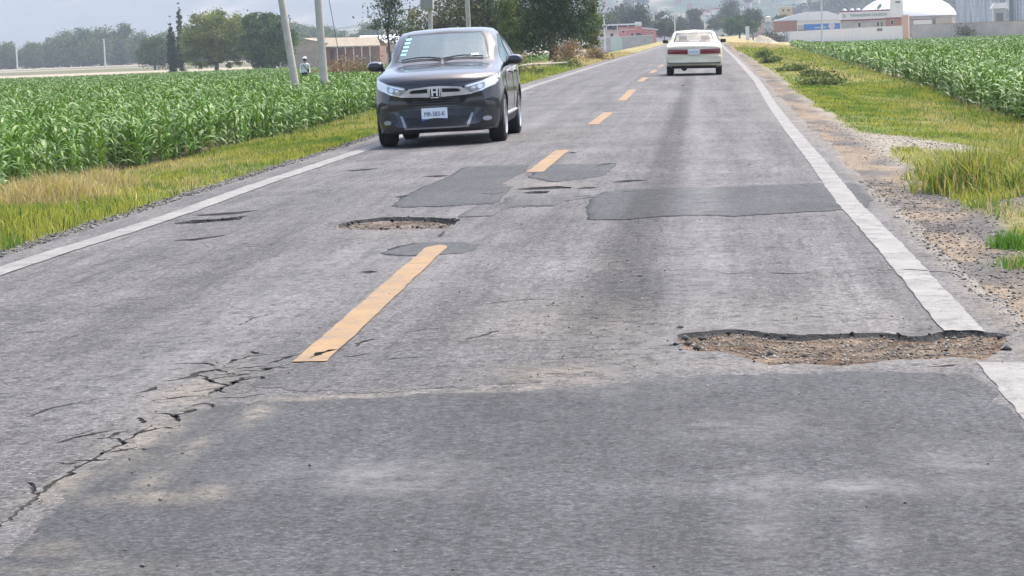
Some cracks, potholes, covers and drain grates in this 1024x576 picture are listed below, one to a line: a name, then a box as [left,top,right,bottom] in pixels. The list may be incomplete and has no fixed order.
pothole [335,215,460,230]
pothole [673,329,1012,366]
crack [0,351,295,526]
